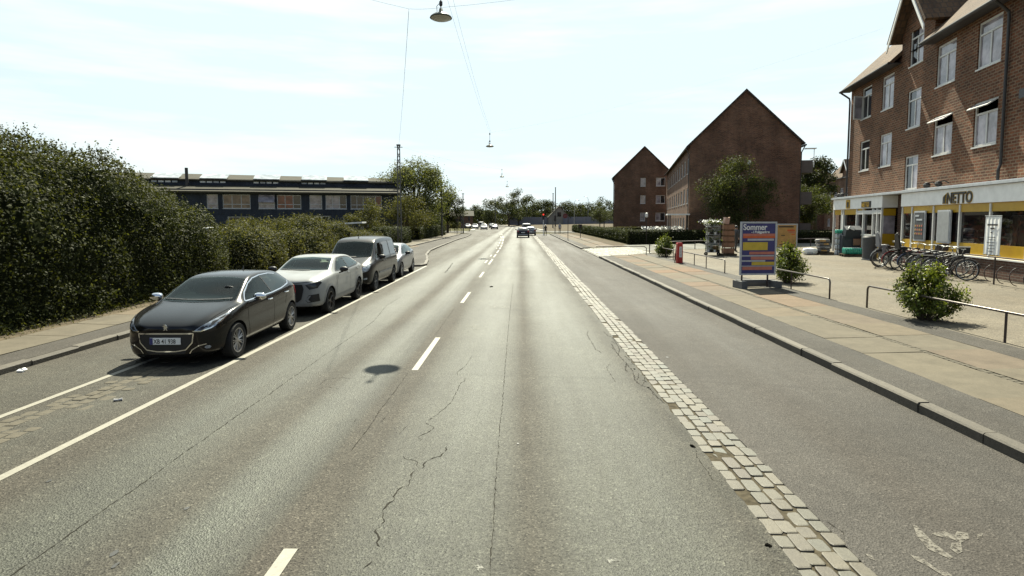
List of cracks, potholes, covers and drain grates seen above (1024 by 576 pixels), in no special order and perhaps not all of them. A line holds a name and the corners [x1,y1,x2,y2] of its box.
crack [587,332,664,403]
crack [352,356,472,567]
